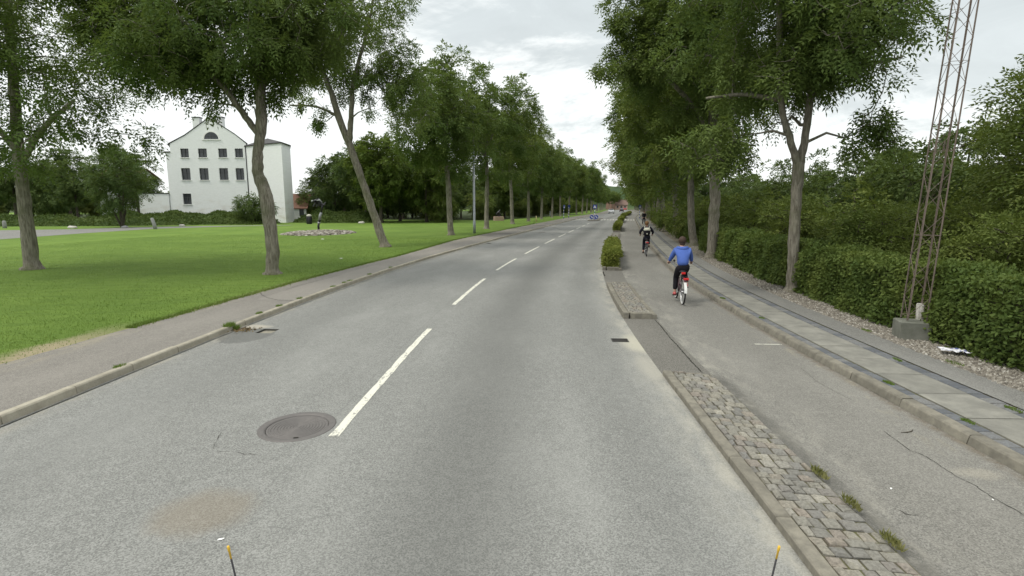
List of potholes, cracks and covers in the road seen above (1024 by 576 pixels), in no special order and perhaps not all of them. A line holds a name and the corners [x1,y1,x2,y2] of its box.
crack [884,431,1023,515]
manhole cover [257,412,336,442]
